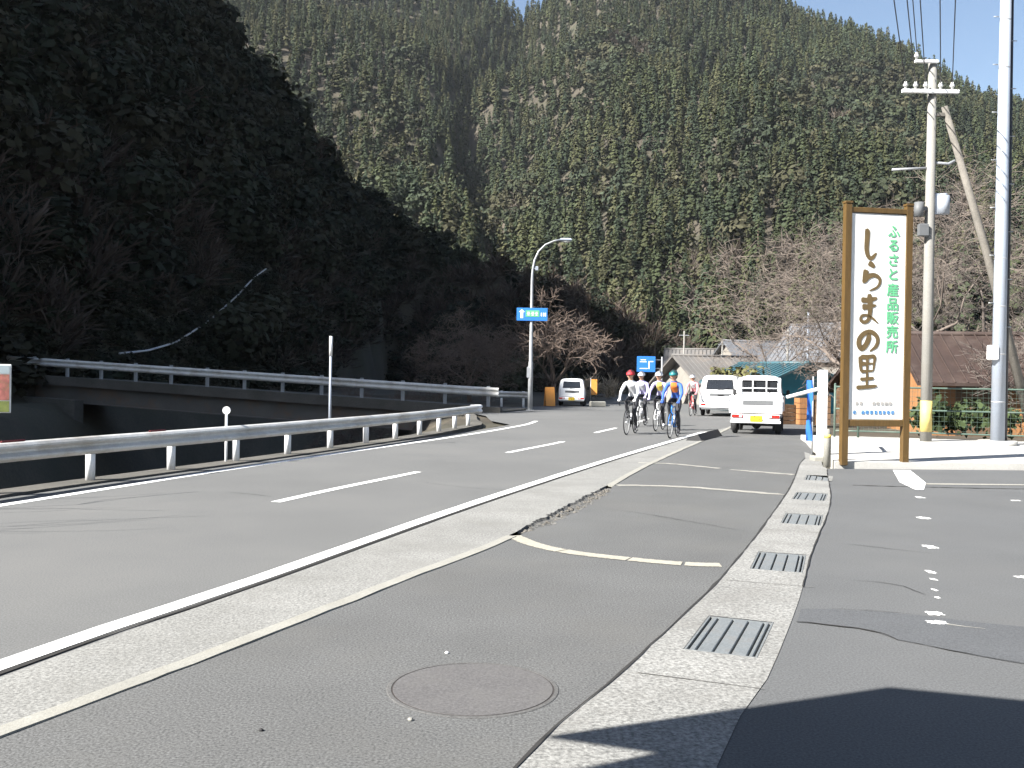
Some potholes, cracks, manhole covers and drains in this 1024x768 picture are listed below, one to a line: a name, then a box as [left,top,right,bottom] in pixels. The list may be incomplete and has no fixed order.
drain grate [792,492,828,501]
pothole [517,486,611,534]
drain grate [750,552,806,573]
drain grate [781,513,823,526]
drain grate [684,616,774,658]
manhole cover [386,662,559,718]
